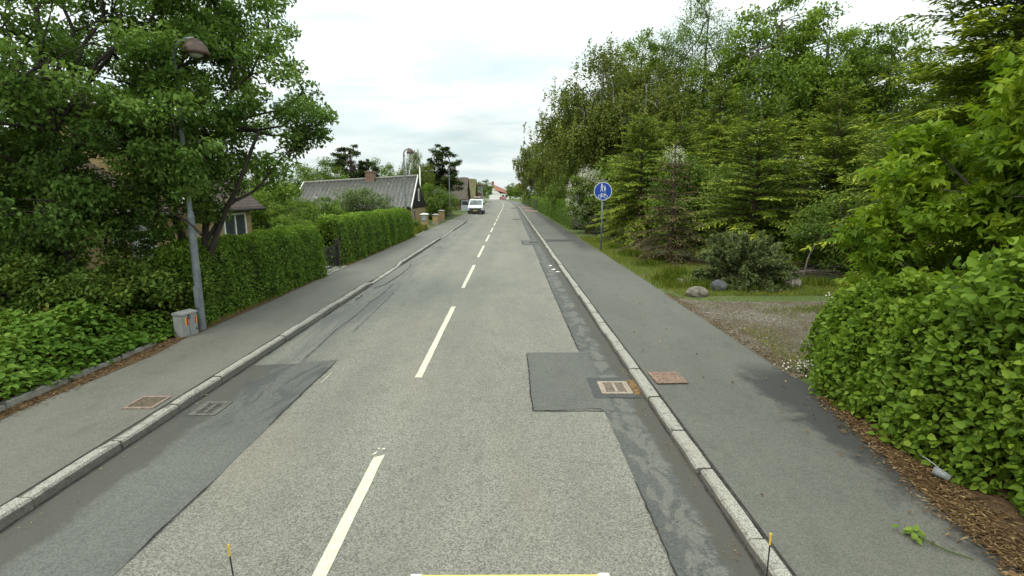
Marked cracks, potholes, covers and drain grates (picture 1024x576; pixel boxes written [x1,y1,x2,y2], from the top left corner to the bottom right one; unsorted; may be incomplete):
utility cover [121,396,172,409]
drain grate [597,381,633,394]
drain grate [187,401,233,416]
utility cover [648,372,689,384]
